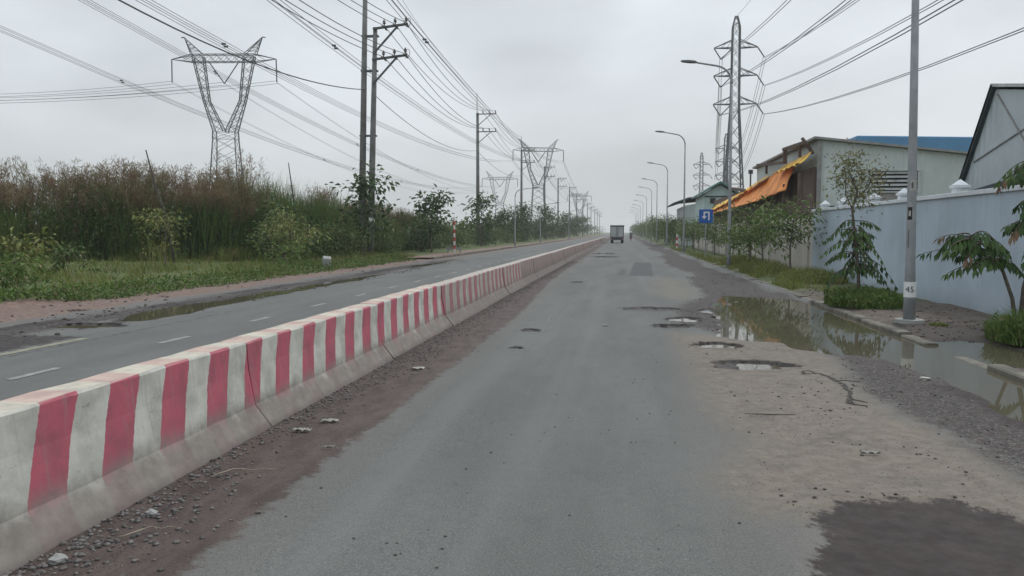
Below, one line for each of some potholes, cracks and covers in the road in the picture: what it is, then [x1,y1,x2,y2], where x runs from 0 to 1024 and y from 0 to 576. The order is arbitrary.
pothole [699,359,817,372]
crack [801,370,868,407]
pothole [681,340,752,350]
